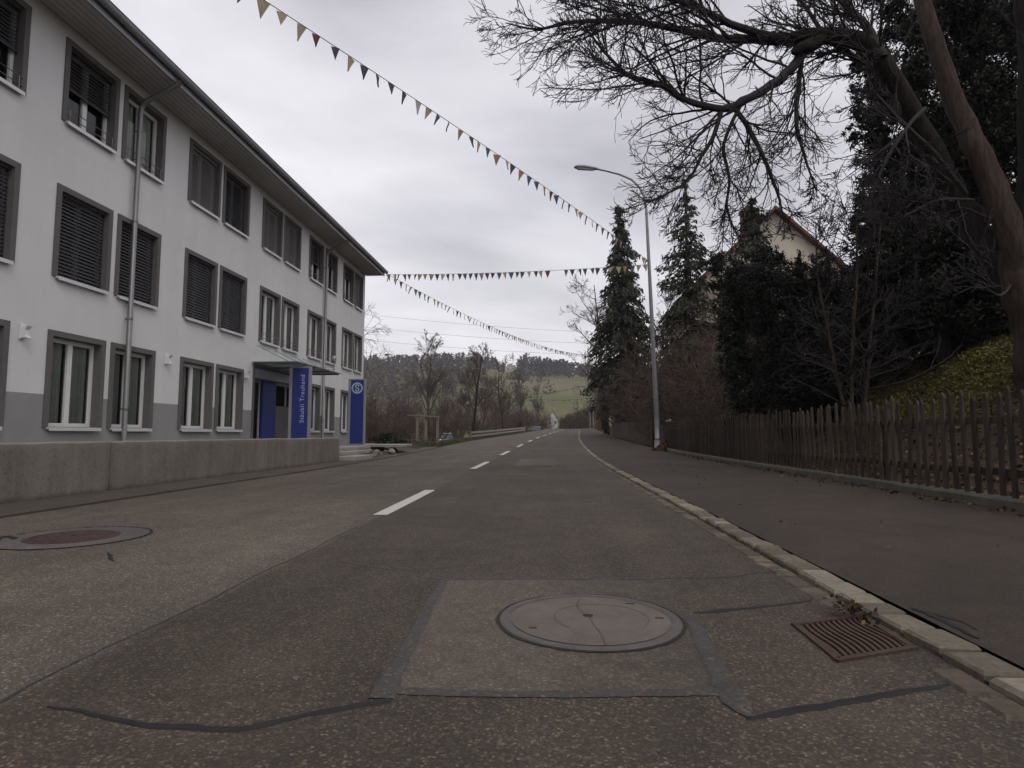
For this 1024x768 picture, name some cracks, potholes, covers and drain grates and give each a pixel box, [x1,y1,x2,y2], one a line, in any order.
manhole cover [0,526,153,550]
manhole cover [495,594,687,652]
drain grate [791,614,919,663]
